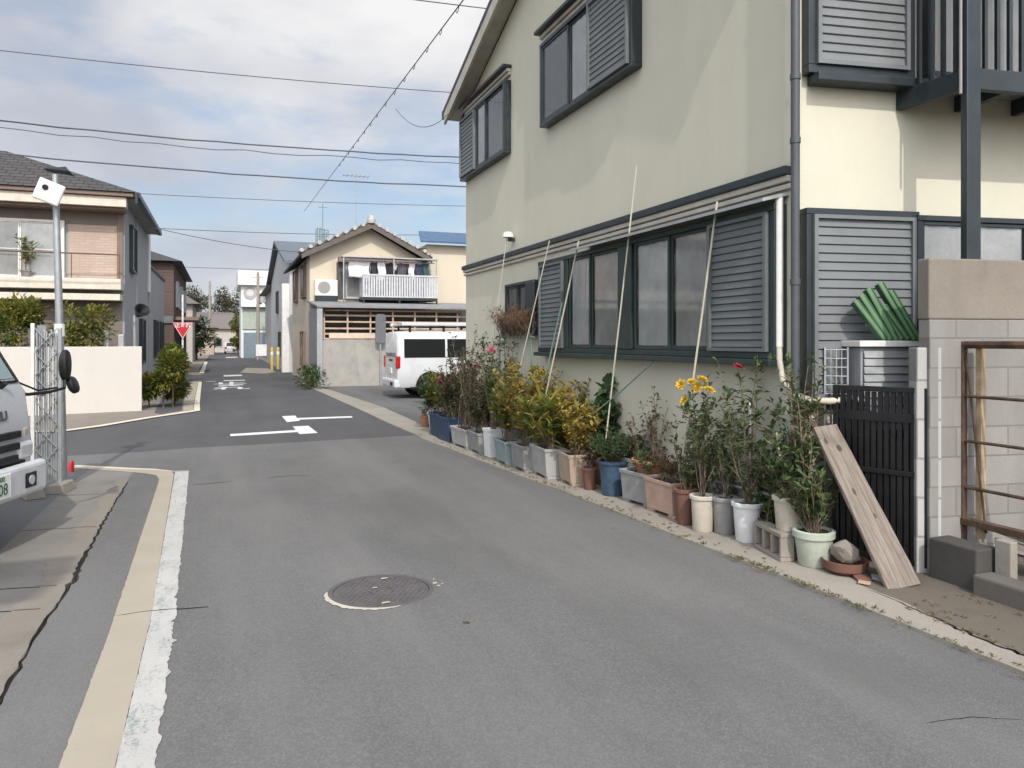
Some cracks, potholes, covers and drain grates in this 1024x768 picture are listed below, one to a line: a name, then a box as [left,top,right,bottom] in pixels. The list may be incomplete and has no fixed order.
crack [0,483,127,703]
crack [116,607,204,616]
manhole cover [324,574,443,610]
crack [873,591,1023,656]
